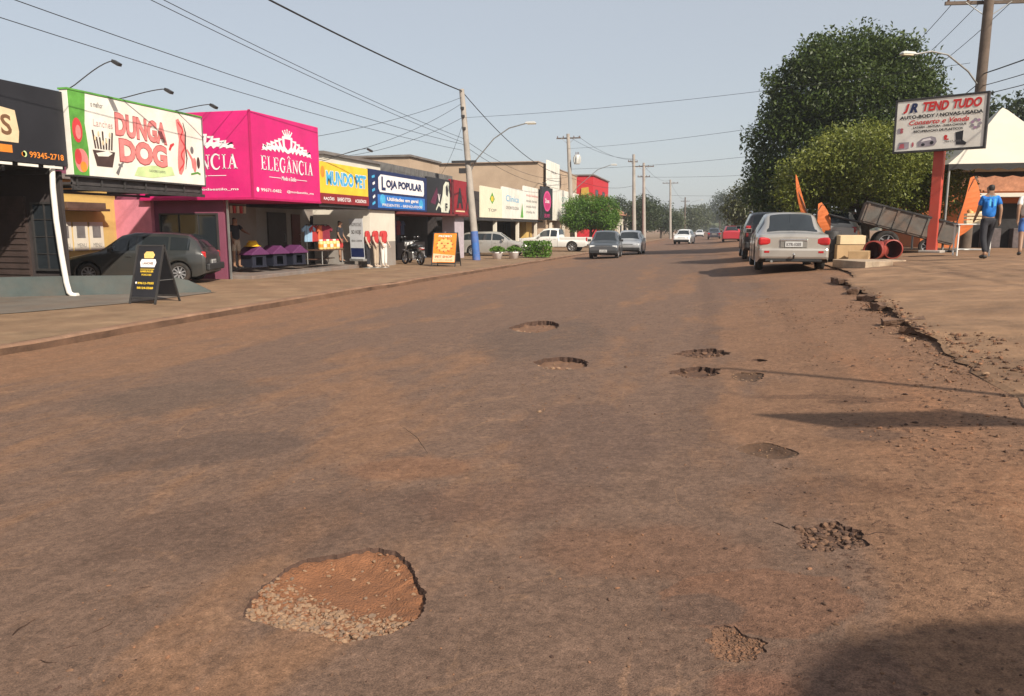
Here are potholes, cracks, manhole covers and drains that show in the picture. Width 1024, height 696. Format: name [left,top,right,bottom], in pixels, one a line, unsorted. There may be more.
pothole [243,548,427,644]
pothole [730,372,764,382]
pothole [534,357,589,370]
pothole [704,624,768,663]
pothole [736,442,799,459]
pothole [674,348,731,358]
pothole [773,521,884,552]
pothole [509,321,559,333]
pothole [668,366,720,378]
